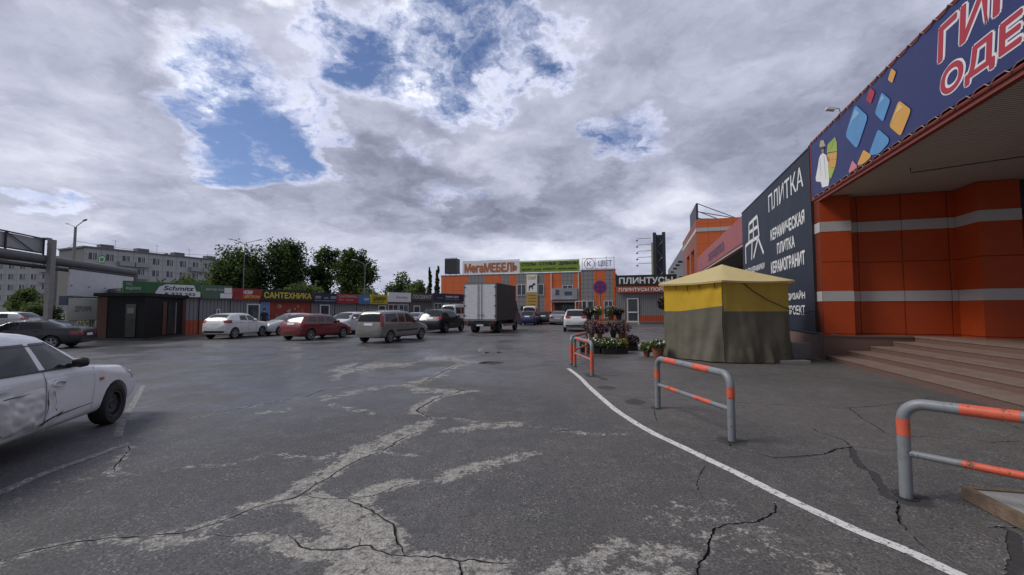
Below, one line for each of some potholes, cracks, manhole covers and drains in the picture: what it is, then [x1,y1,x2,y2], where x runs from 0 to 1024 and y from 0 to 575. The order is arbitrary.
crack [601,393,1024,575]
crack [1,362,568,575]
